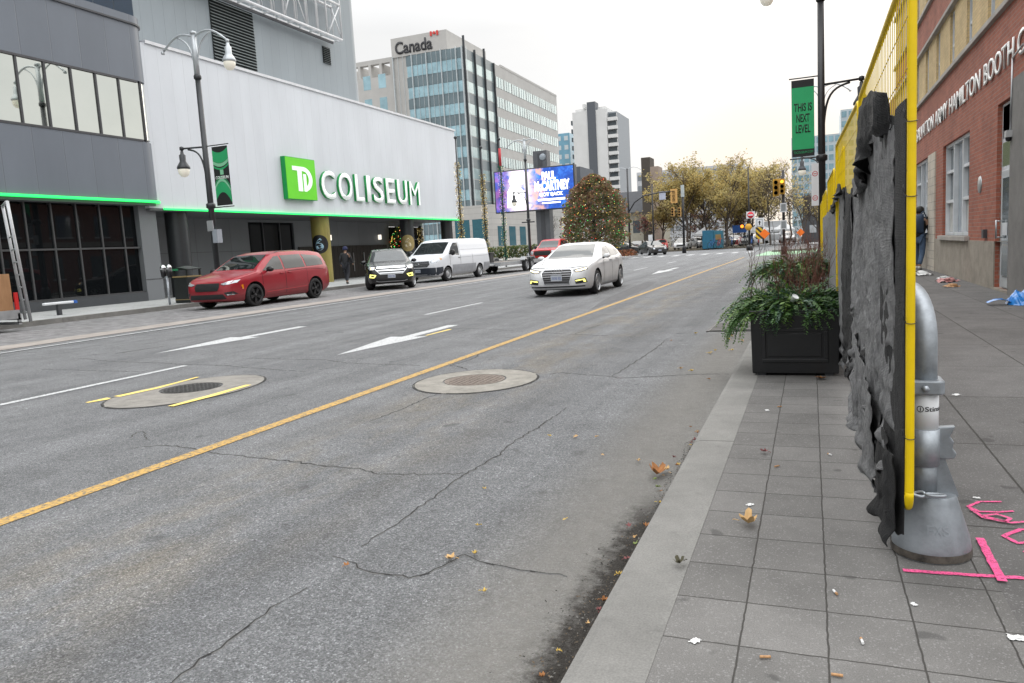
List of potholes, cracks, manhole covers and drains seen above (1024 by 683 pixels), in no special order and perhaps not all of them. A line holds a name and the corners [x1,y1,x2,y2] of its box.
manhole cover [412,369,539,394]
crack [553,339,703,378]
crack [171,587,307,683]
manhole cover [100,375,267,409]
crack [127,408,568,579]
crack [369,394,436,422]
